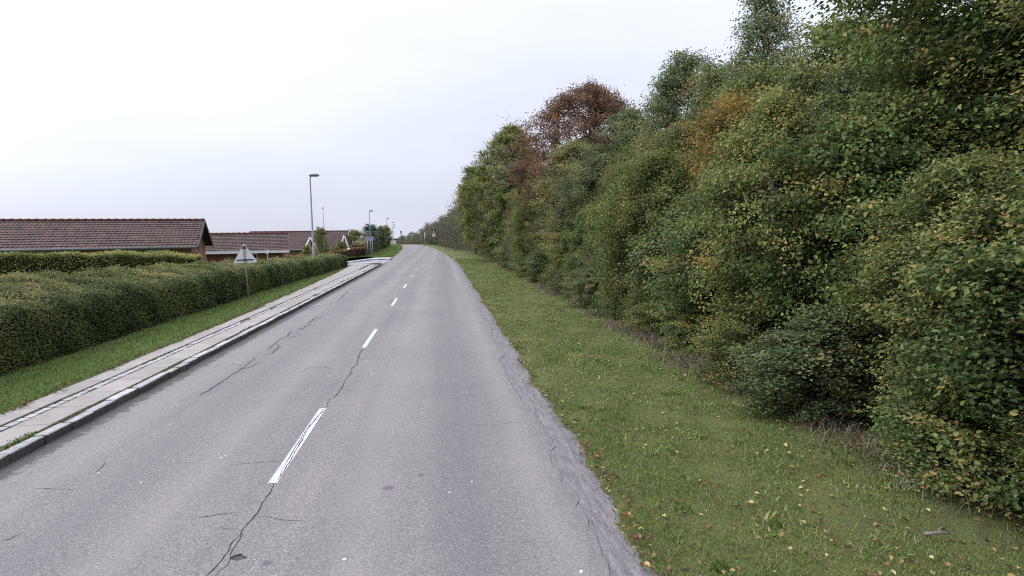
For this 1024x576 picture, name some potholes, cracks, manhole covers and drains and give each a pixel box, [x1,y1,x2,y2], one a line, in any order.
crack [199,287,356,396]
crack [200,349,379,576]
